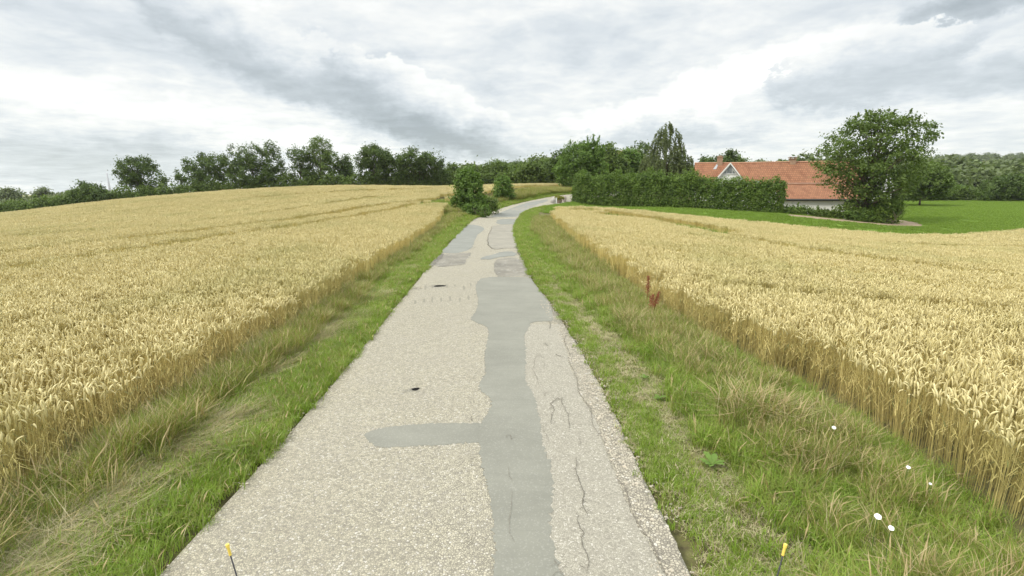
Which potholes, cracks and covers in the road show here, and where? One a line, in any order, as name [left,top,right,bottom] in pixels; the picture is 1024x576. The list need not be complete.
crack [533,323,604,440]
crack [550,460,589,575]
